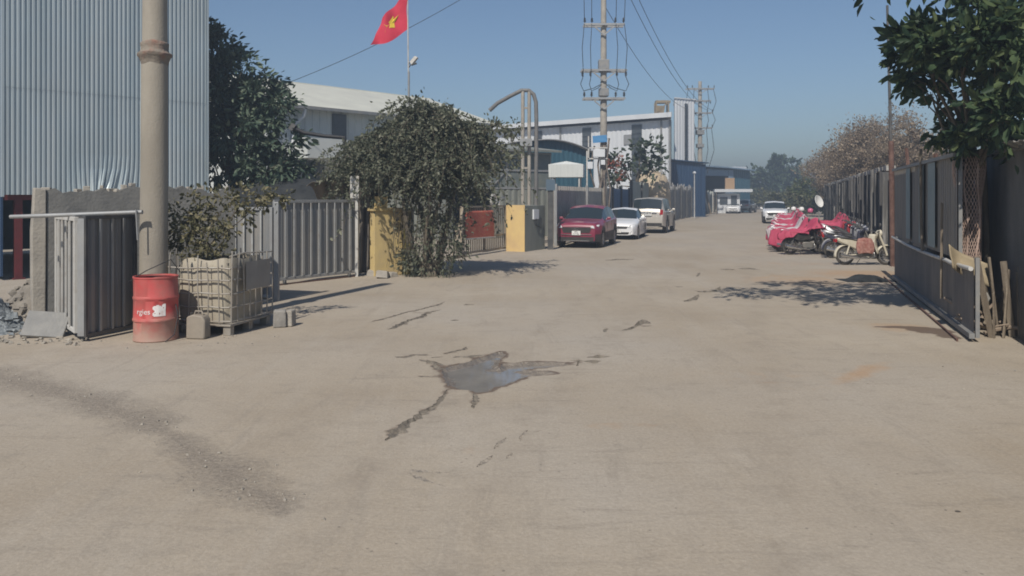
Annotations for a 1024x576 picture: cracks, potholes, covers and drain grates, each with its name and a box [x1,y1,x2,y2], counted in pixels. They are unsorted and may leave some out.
crack [372,302,474,330]
crack [385,347,482,441]
pothole [442,351,569,393]
